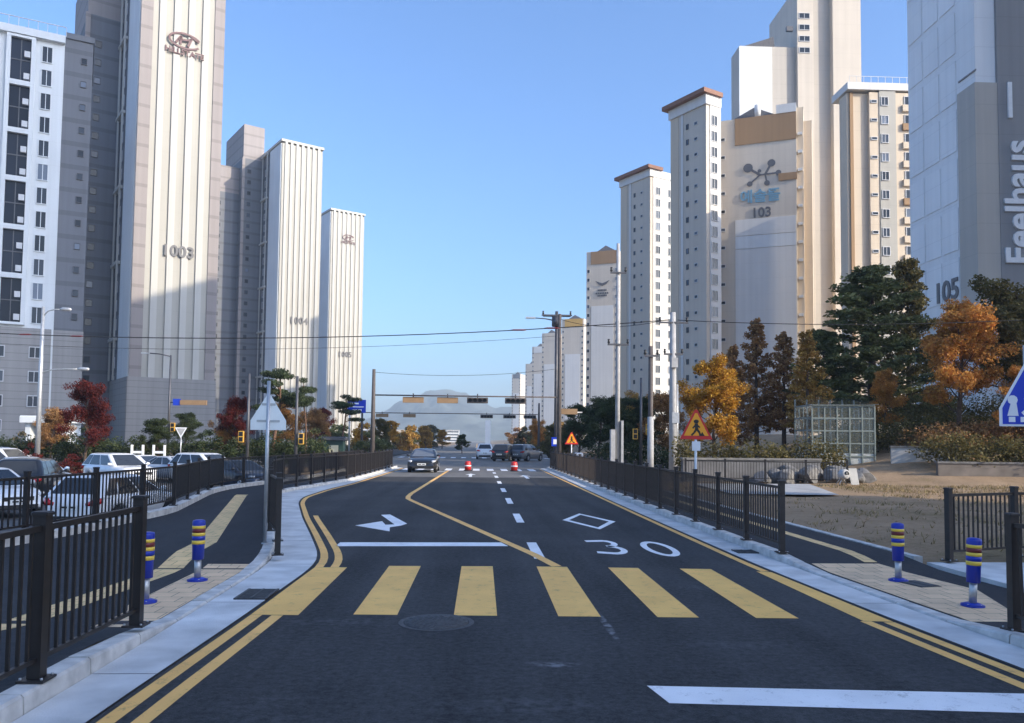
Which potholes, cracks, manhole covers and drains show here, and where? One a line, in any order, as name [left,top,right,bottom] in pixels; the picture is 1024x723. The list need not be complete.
drain grate [233,588,279,600]
manhole cover [398,614,474,631]
